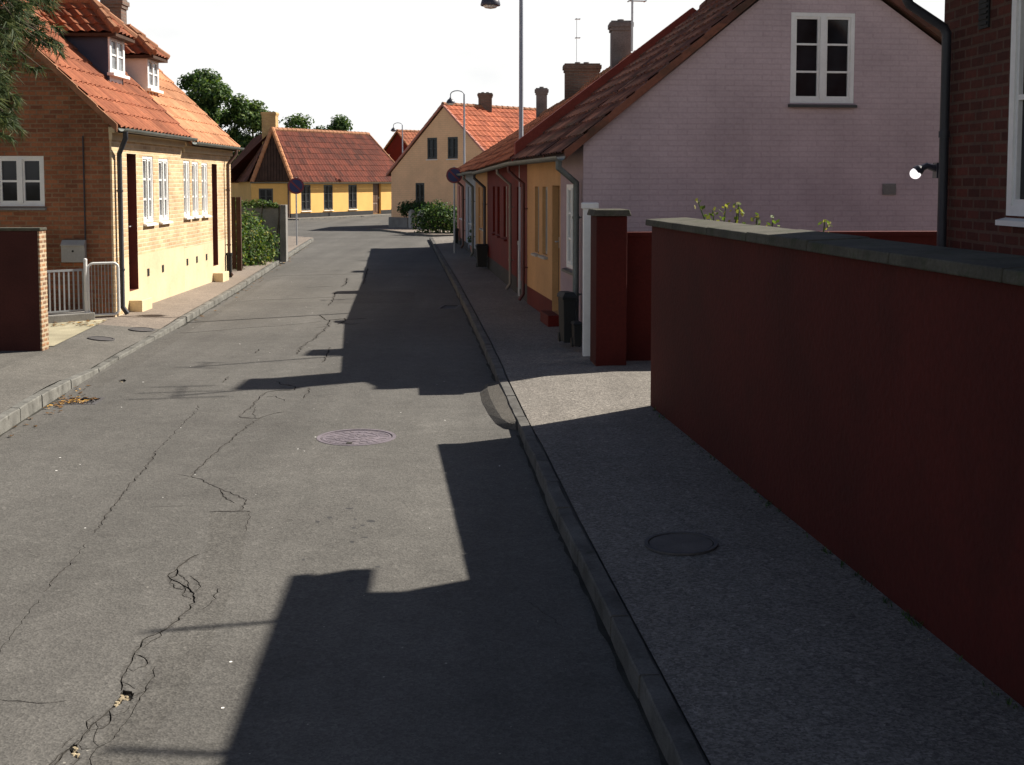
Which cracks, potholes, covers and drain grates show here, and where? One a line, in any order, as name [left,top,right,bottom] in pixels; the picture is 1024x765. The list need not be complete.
crack [94,406,198,533]
manhole cover [317,429,396,446]
crack [190,269,369,363]
crack [4,554,218,765]
crack [160,382,310,531]
manhole cover [644,531,718,555]
